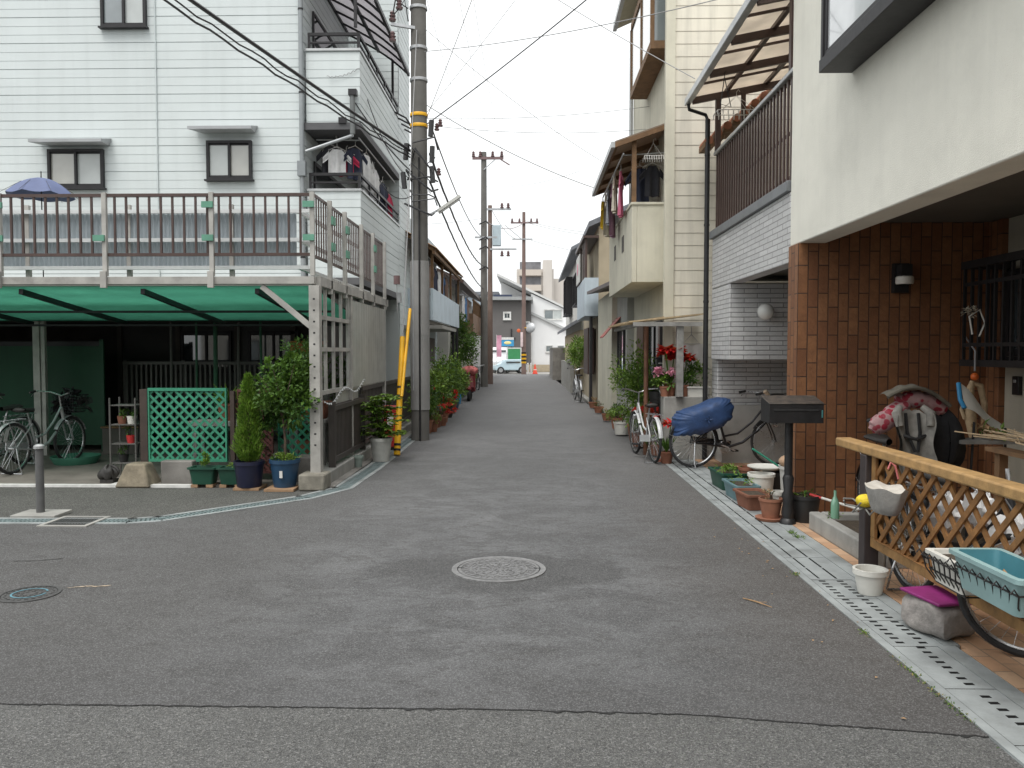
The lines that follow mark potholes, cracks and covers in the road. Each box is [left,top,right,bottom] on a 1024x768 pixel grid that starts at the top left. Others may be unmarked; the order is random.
manhole cover [0,585,62,603]
drain grate [36,516,111,527]
manhole cover [452,556,546,583]
